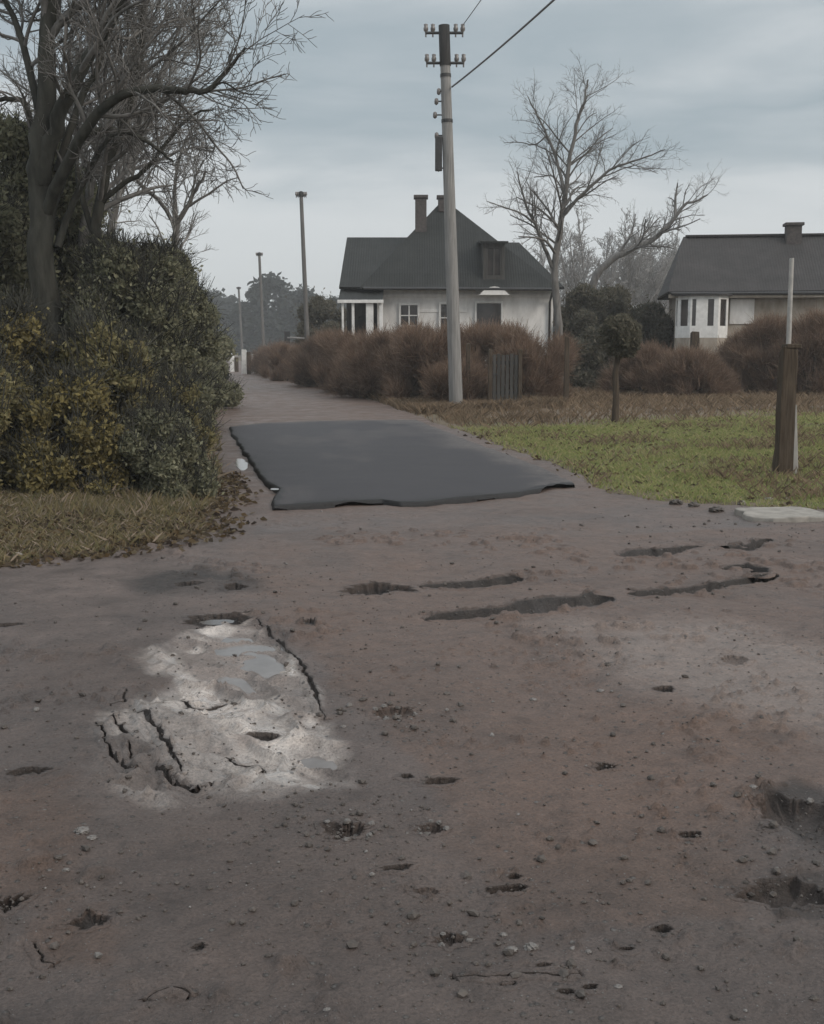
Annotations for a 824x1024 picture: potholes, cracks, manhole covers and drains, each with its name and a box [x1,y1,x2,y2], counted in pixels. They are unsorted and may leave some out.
pothole [417,572,528,591]
pothole [0,889,41,918]
pothole [714,537,780,552]
crack [23,939,61,970]
pothole [421,589,620,622]
pothole [332,580,425,598]
pothole [627,562,783,599]
pothole [313,818,379,844]
pothole [240,728,285,745]
pothole [54,908,119,936]
pothole [726,869,824,911]
crack [452,968,582,986]
